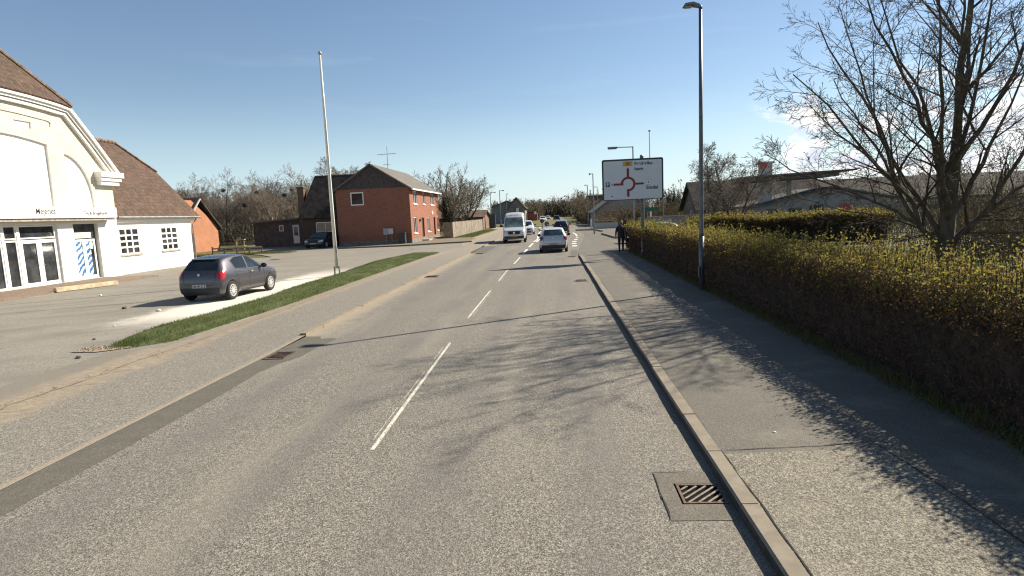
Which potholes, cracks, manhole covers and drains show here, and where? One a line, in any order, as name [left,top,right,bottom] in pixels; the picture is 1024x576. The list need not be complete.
drain grate [675,483,729,504]
drain grate [262,351,297,360]
